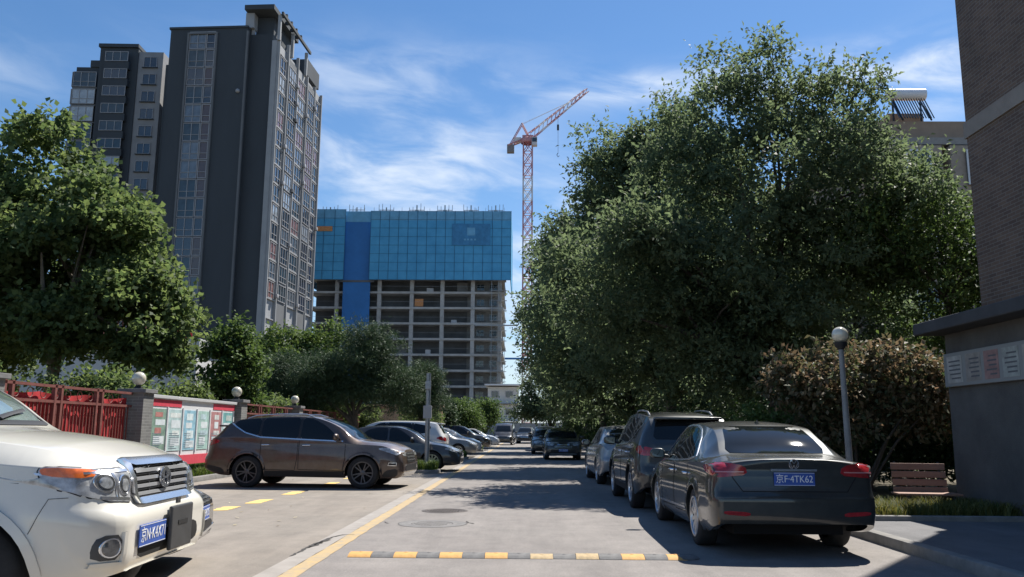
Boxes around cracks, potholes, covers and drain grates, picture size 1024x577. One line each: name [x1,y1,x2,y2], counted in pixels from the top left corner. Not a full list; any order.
manhole cover [398,520,468,528]
